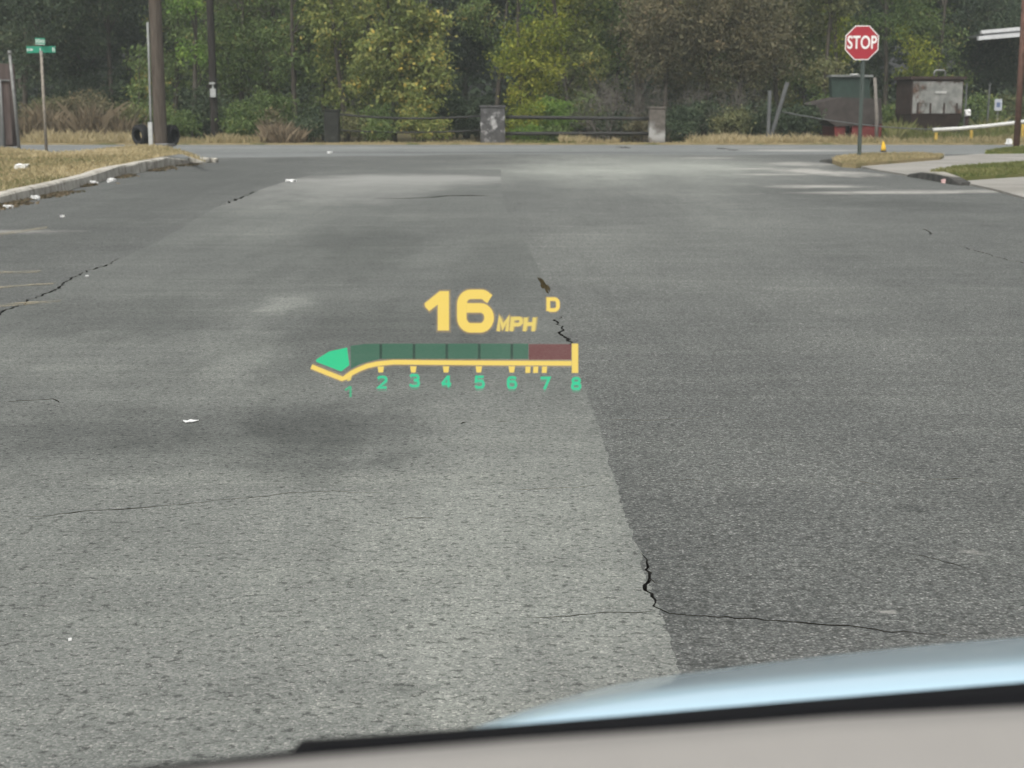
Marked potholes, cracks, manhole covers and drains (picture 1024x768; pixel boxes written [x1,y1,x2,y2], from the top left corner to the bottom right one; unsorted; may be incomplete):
crack [559,554,905,633]
